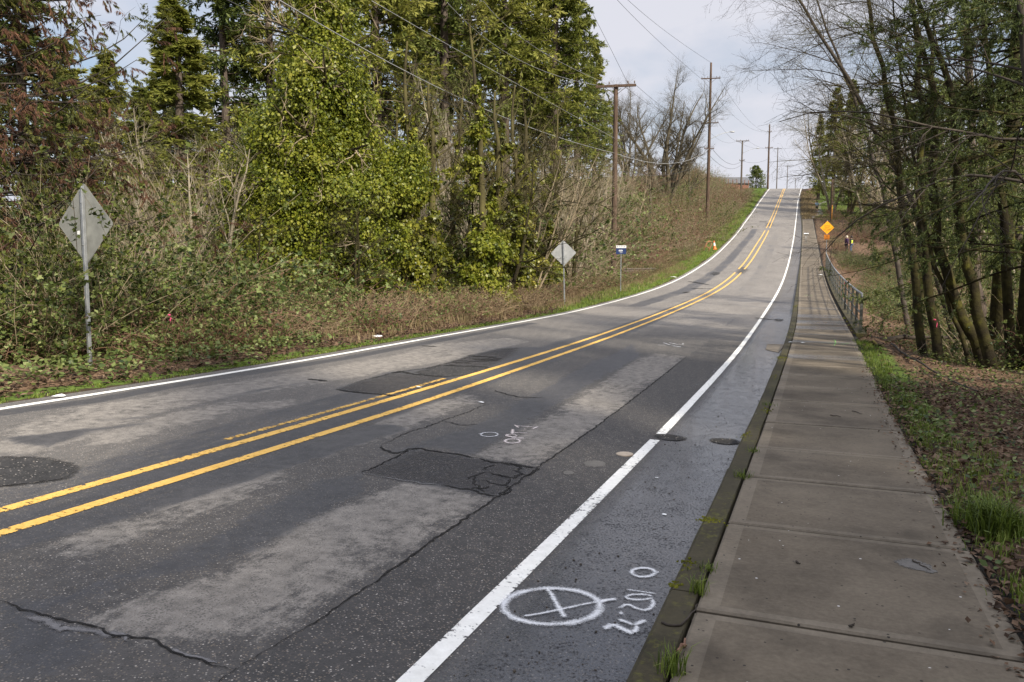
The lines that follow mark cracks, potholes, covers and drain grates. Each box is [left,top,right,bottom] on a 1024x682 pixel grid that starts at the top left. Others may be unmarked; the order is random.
crack [362,390,541,496]
crack [0,600,229,669]
